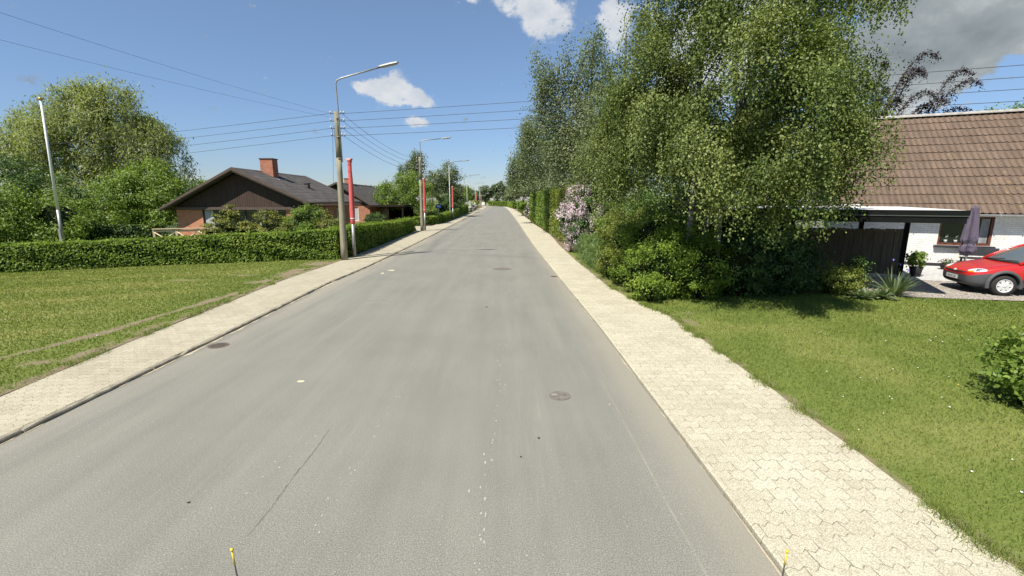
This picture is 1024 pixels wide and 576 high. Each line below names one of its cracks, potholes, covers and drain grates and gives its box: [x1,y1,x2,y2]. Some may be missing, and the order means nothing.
manhole cover [549,391,571,400]
crack [247,430,329,535]
